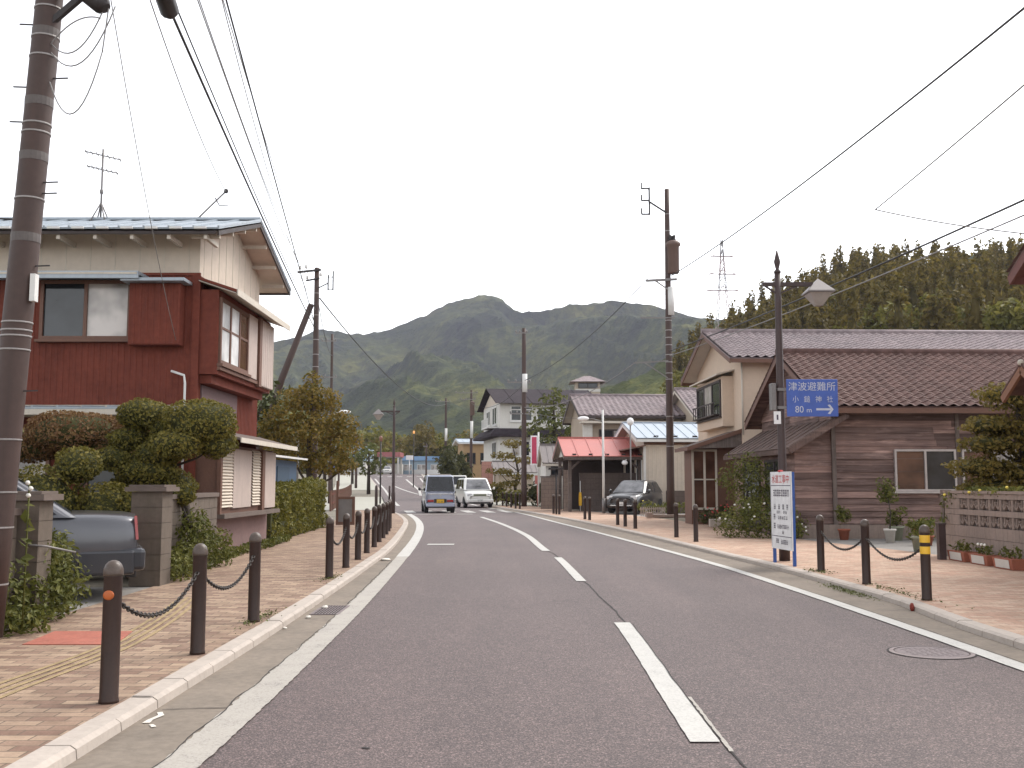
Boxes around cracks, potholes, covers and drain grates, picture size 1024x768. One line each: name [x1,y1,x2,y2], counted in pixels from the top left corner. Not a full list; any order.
drain grate [309,605,350,615]
manhole cover [887,645,978,659]
